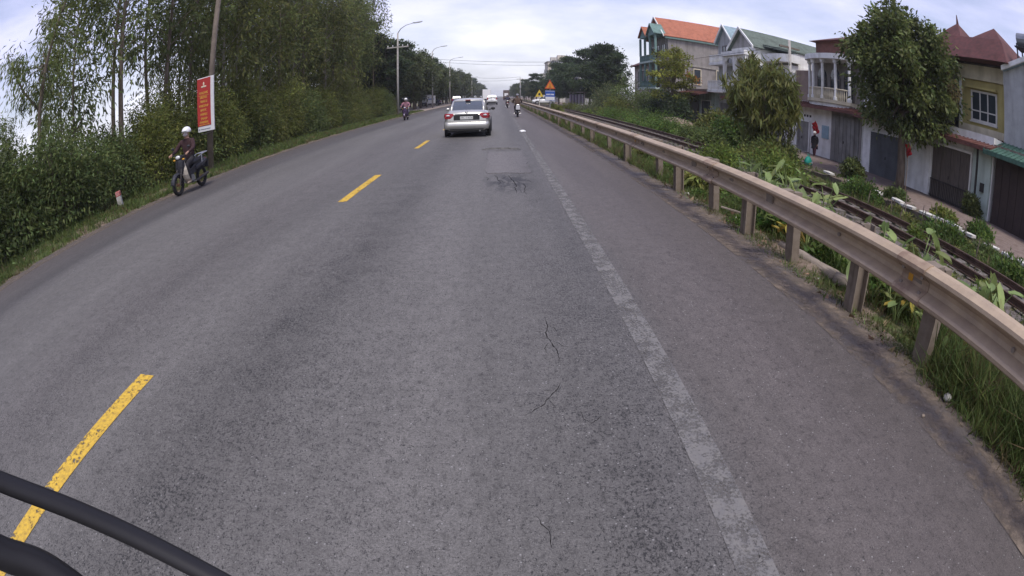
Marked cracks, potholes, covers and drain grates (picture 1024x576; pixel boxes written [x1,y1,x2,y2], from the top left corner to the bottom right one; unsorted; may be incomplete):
crack [537,319,567,362]
